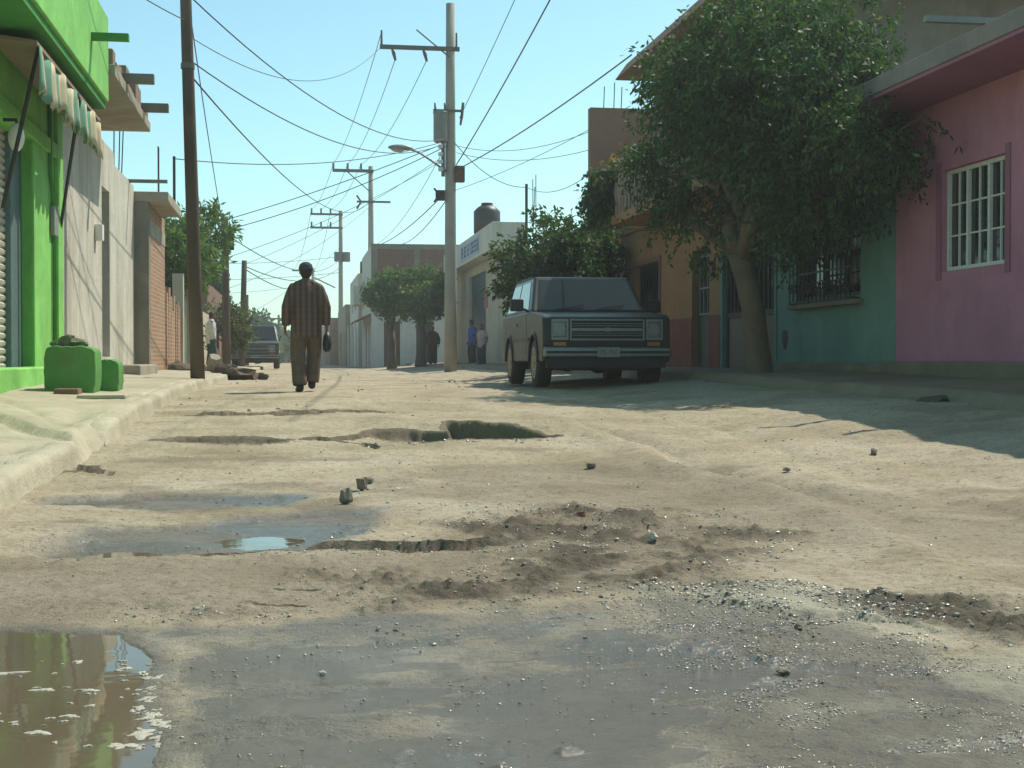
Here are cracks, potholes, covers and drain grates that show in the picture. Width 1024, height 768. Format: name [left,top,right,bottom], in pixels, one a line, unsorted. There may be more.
pothole [438,420,564,441]
pothole [149,435,296,446]
